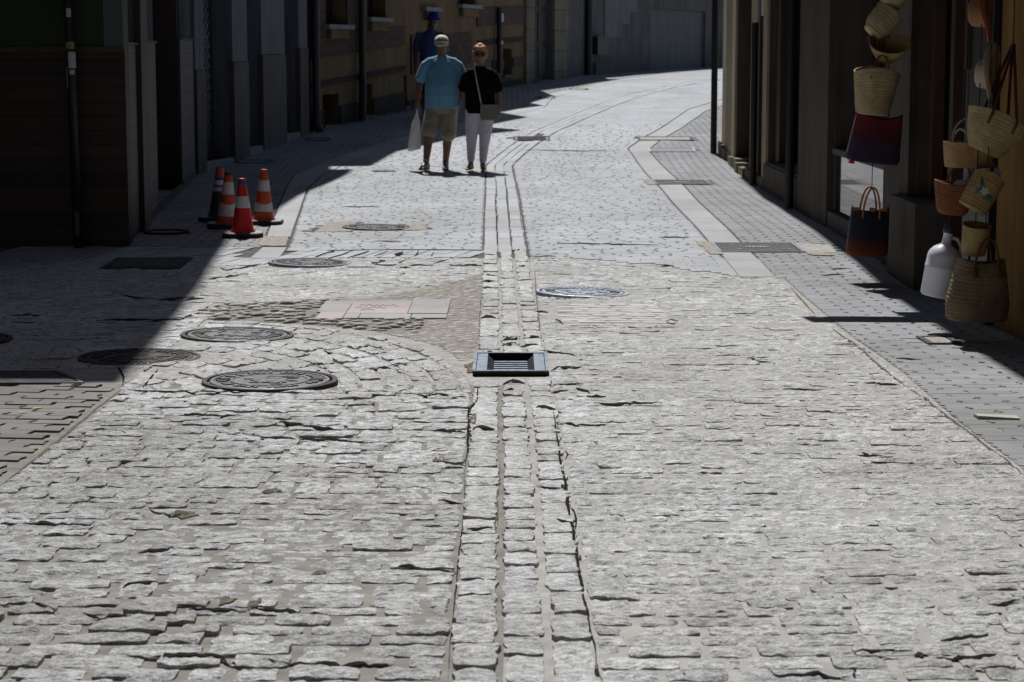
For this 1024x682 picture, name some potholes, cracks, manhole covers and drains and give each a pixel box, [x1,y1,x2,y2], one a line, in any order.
manhole cover [181,327,294,342]
manhole cover [78,348,201,365]
manhole cover [536,286,629,298]
drain grate [472,352,549,377]
manhole cover [268,258,351,268]
drain grate [99,257,193,270]
manhole cover [0,333,13,344]
manhole cover [202,369,338,393]
utility cover [710,242,806,253]
